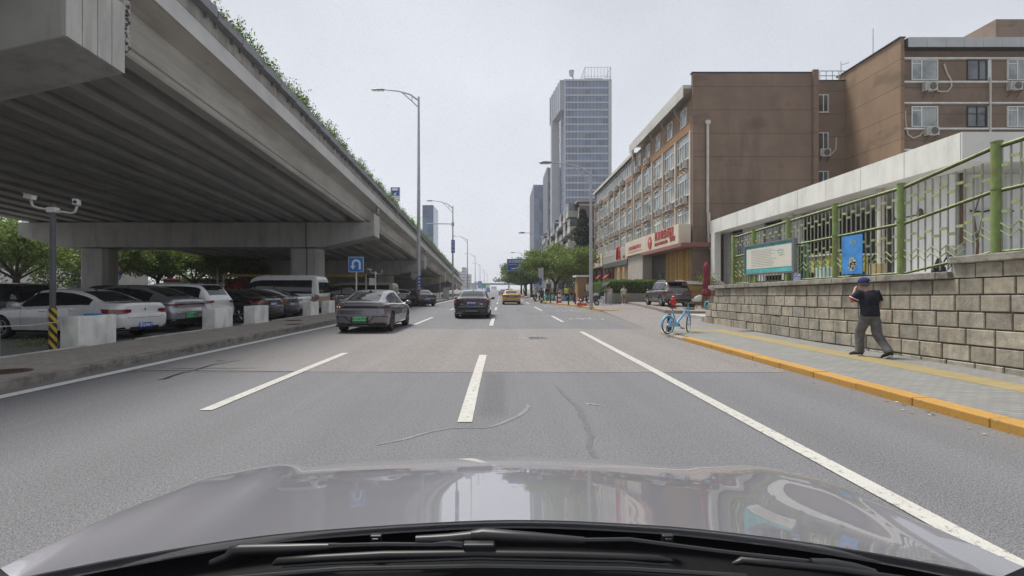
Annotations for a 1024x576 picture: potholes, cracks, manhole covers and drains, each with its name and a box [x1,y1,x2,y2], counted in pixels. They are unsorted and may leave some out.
crack [131,360,294,380]
